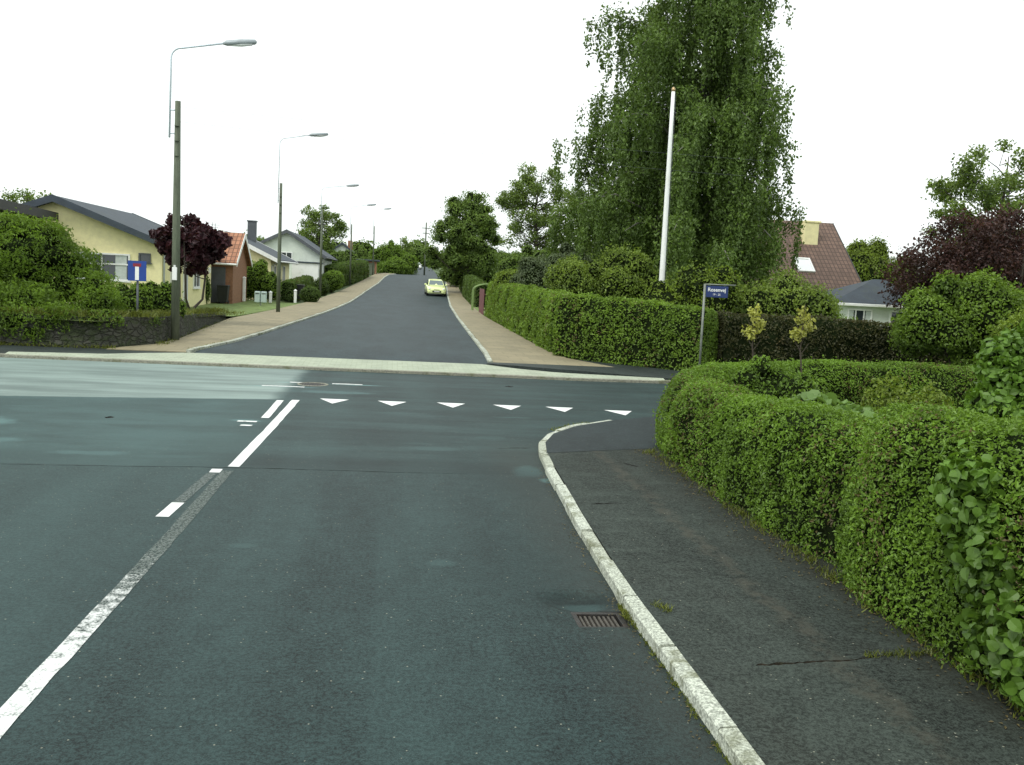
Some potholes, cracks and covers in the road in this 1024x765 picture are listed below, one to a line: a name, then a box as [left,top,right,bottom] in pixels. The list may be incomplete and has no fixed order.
crack [755,654,930,666]
drain grate [570,612,631,628]
